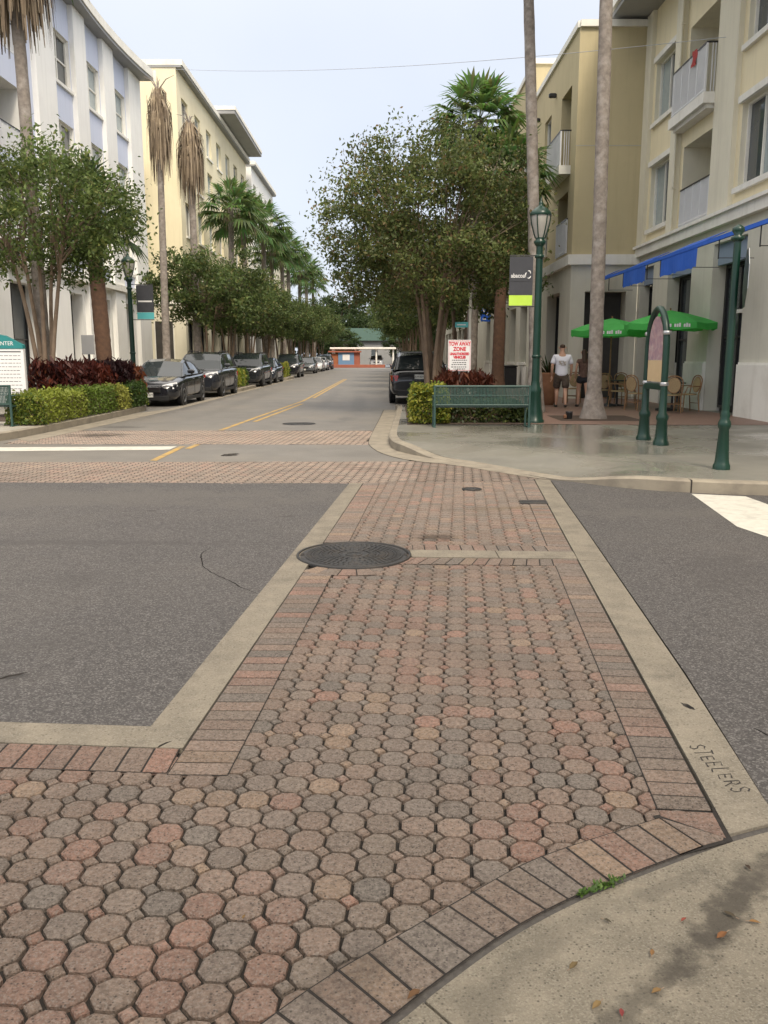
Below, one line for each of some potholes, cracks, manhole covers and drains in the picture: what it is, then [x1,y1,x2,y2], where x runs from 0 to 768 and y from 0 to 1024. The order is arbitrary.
manhole cover [296,541,411,570]
crack [200,549,258,594]
